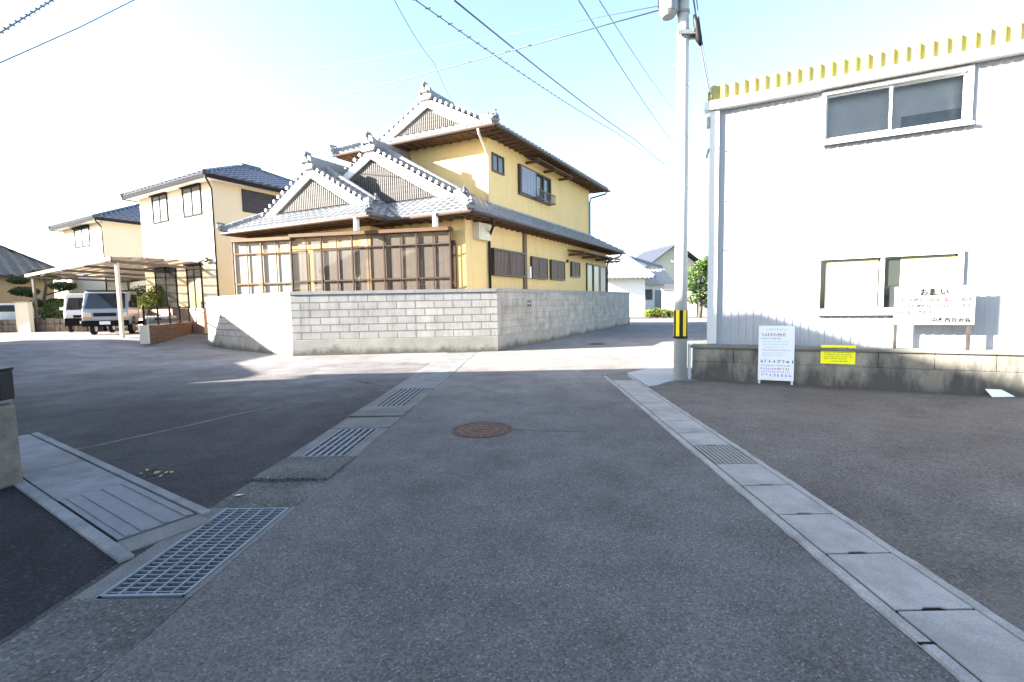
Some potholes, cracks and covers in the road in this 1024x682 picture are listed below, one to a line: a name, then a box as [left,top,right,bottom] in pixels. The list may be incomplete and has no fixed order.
drain grate [694,445,757,464]
drain grate [98,507,290,599]
drain grate [376,388,426,406]
manhole cover [451,421,513,438]
drain grate [301,428,379,457]
